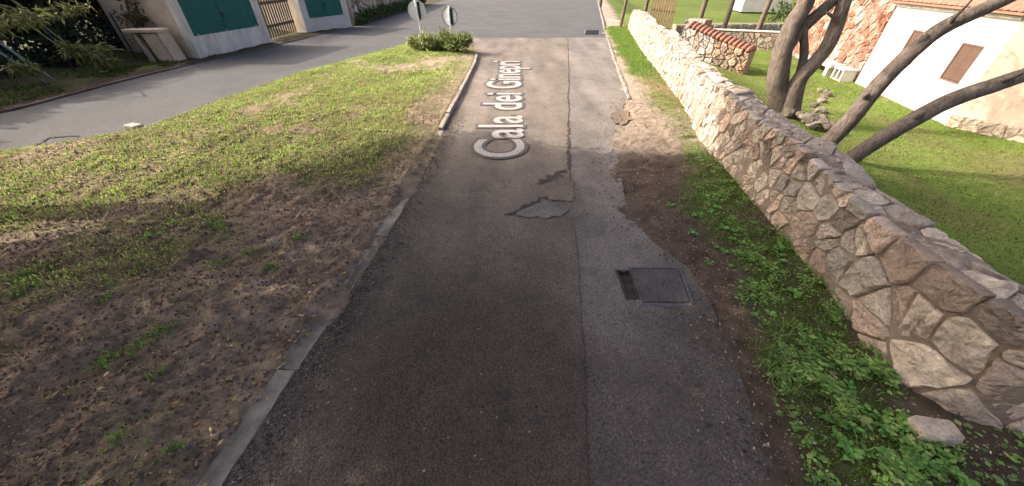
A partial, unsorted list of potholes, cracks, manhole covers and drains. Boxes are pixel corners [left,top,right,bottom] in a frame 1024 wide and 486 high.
manhole cover [628,267,694,306]
crack [34,135,79,146]
